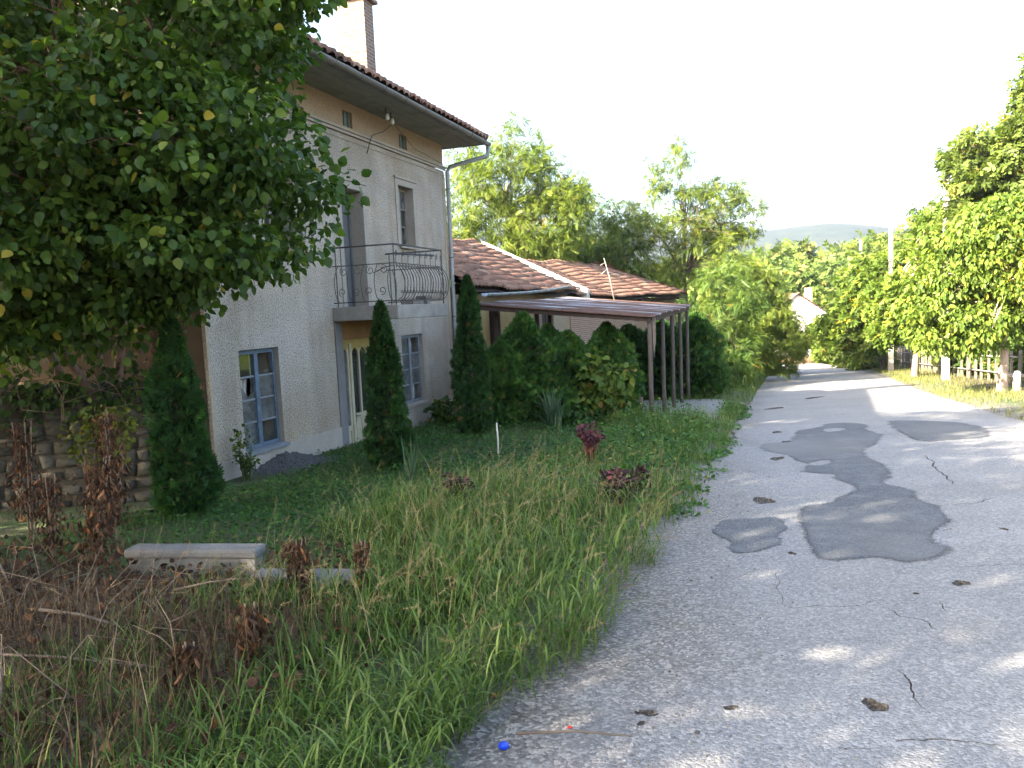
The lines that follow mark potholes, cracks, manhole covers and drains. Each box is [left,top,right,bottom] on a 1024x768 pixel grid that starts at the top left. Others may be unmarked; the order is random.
crack [775,573,946,629]
crack [896,738,1007,746]
crack [898,670,926,710]
